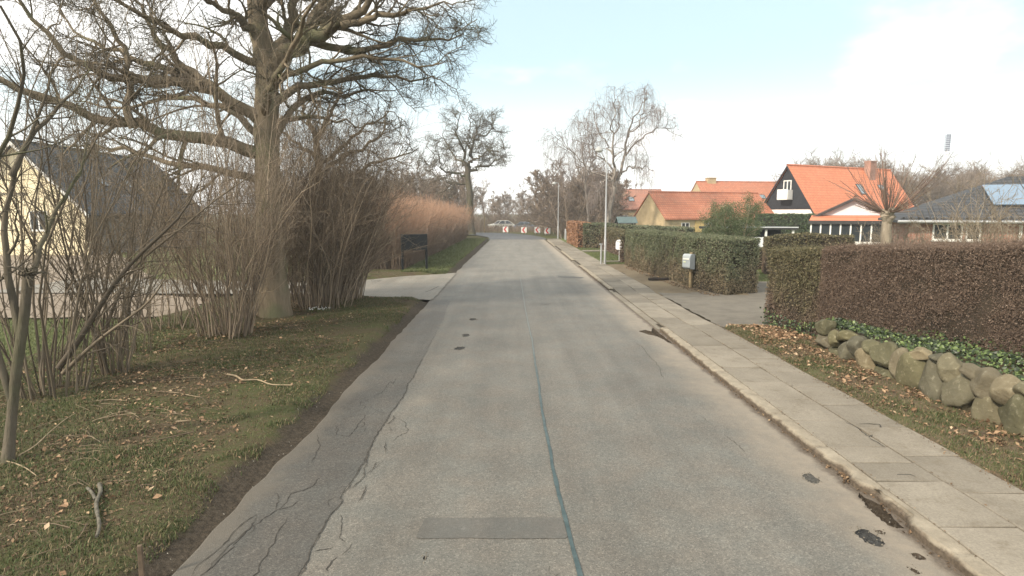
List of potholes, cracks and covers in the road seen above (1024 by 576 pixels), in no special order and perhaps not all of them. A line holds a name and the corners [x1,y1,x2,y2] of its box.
crack [313,370,402,459]
crack [194,479,352,576]
pothole [858,492,904,528]
pothole [639,328,672,344]
